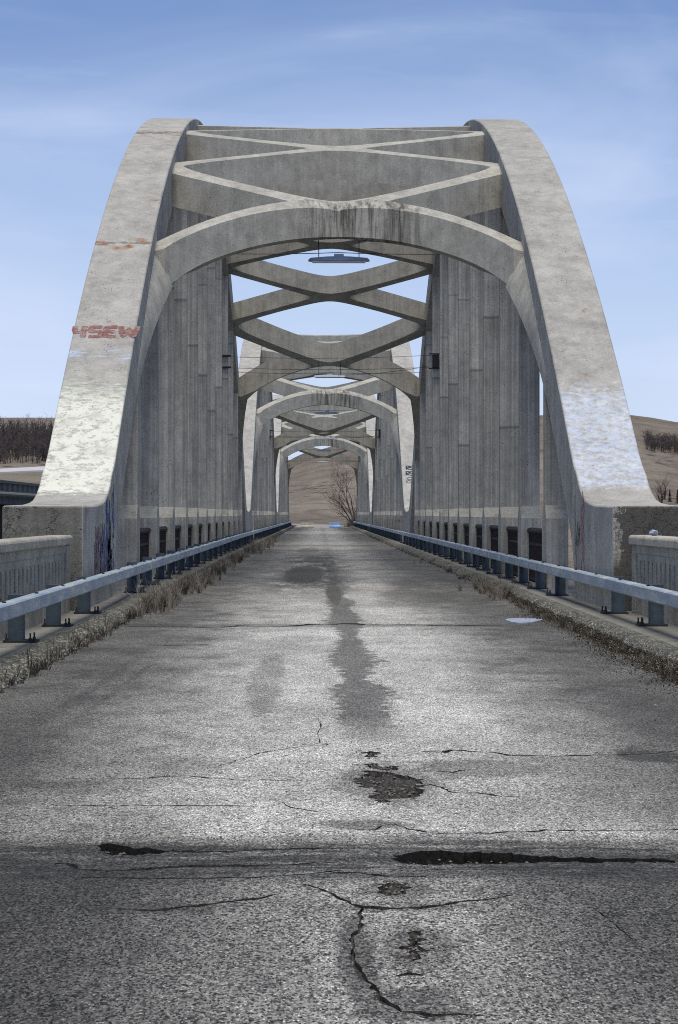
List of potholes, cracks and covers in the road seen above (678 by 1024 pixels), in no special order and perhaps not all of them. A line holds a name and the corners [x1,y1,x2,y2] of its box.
crack [417,750,674,797]
crack [374,824,678,834]
pothole [87,838,182,860]
crack [54,848,511,1017]
pothole [364,880,424,897]
pothole [361,846,676,870]
pothole [345,768,435,805]
crack [68,720,336,781]
